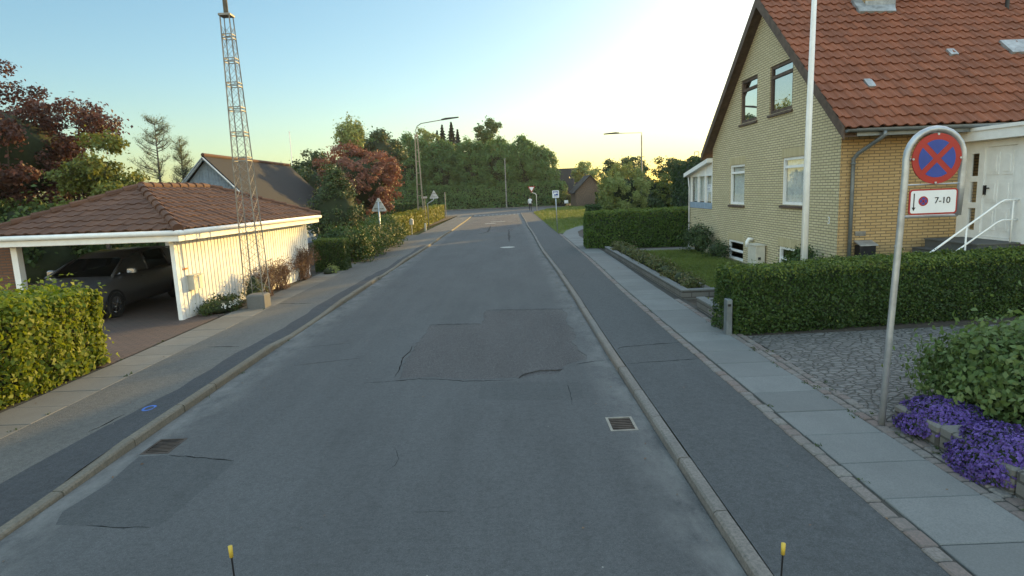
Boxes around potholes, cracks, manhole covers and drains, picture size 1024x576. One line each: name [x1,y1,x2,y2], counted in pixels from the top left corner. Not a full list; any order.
crack [370,347,500,383]
drain grate [605,416,639,431]
drain grate [139,438,187,455]
